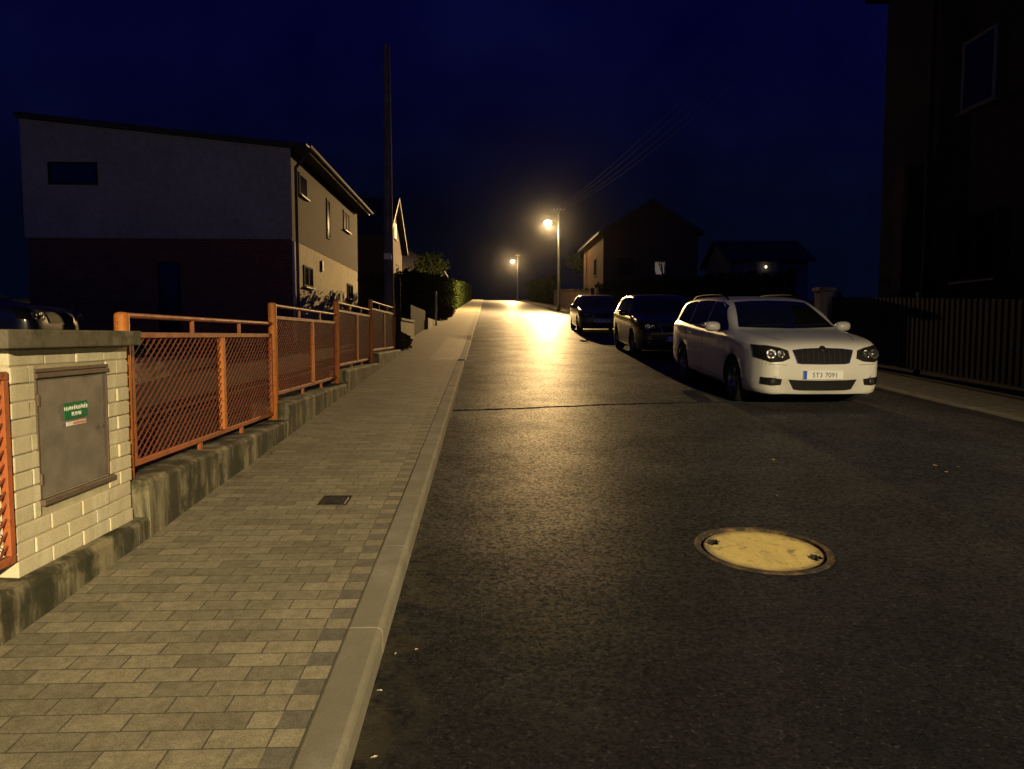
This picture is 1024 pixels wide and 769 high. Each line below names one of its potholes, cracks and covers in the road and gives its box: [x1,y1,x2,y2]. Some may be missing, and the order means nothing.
manhole cover [317,495,352,505]
manhole cover [694,527,835,575]
